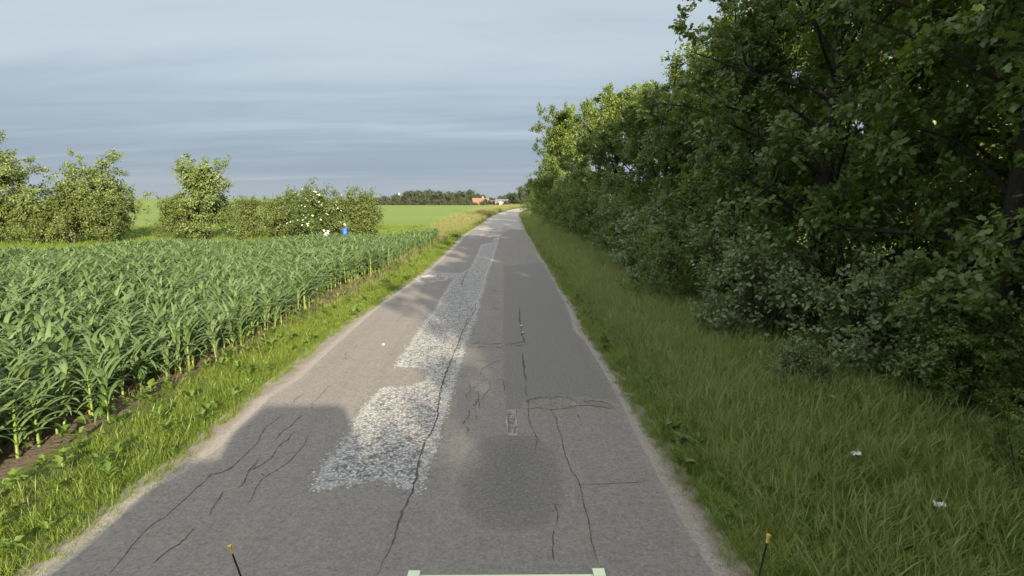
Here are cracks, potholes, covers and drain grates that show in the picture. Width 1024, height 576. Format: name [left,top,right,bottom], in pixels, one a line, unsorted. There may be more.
crack [376,270,505,575]
crack [525,387,634,564]
crack [109,385,331,574]
